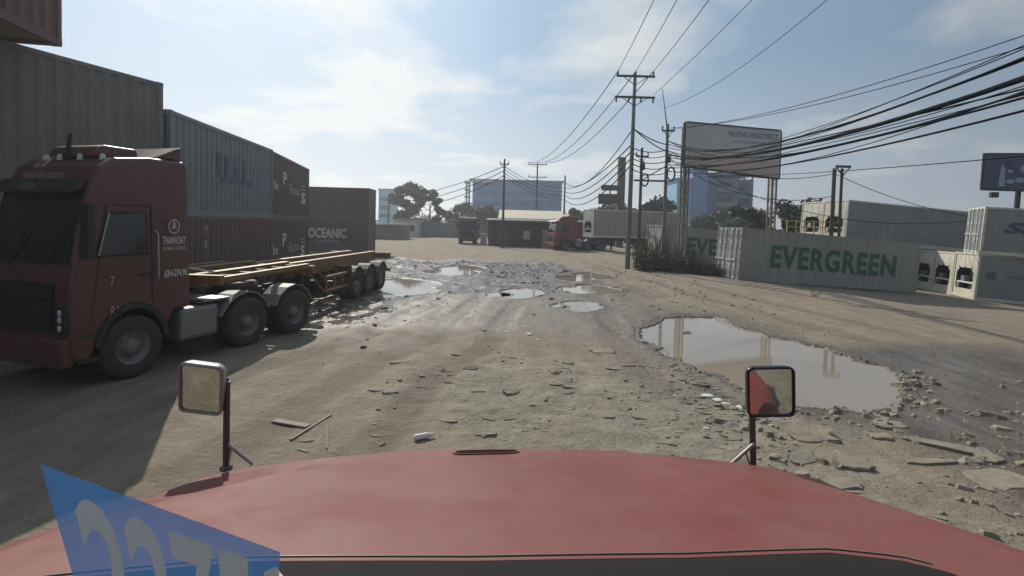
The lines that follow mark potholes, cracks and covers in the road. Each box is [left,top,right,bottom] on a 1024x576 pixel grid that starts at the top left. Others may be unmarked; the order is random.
pothole [420,265,488,276]
pothole [553,272,617,282]
pothole [554,283,624,294]
pothole [374,277,444,296]
pothole [636,315,910,416]
pothole [497,288,547,300]
pothole [559,300,606,312]
